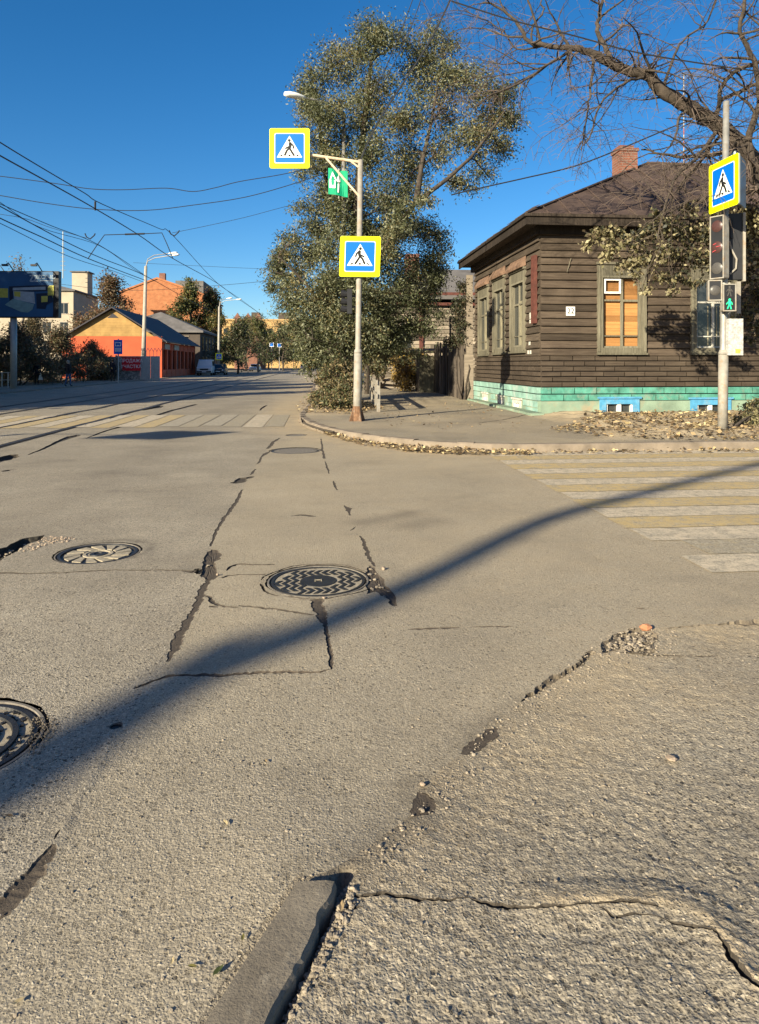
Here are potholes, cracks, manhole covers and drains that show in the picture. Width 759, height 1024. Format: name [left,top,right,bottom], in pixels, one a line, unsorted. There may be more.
crack [0,830,60,920]
manhole cover [0,700,50,769]
crack [343,891,759,988]
pothole [409,792,436,817]
pothole [601,627,658,656]
manhole cover [265,566,369,597]
crack [133,563,370,689]
manhole cover [52,543,142,564]
pothole [461,728,498,755]
